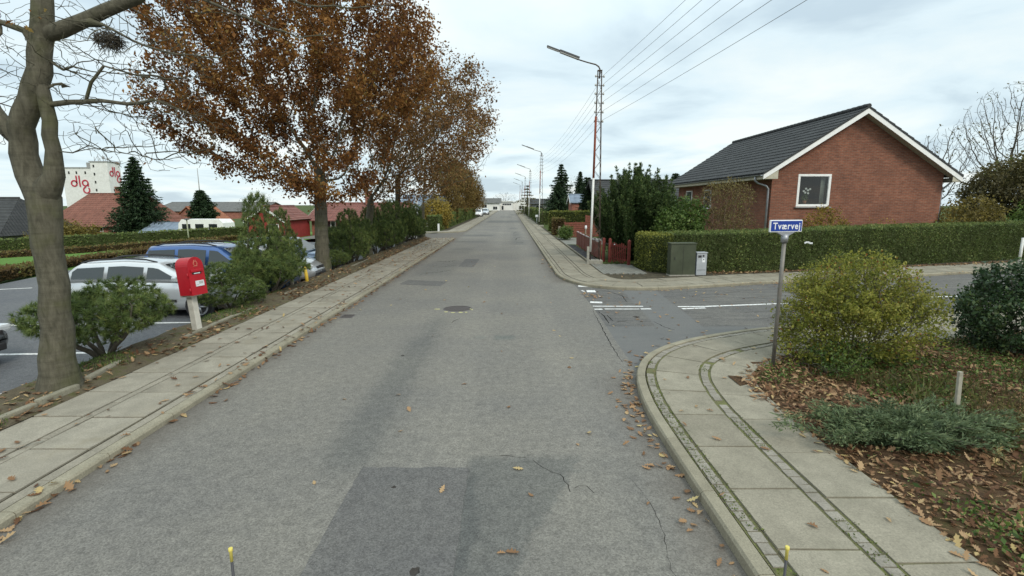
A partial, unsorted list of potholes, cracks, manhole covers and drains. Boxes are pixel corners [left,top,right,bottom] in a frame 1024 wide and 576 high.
crack [500,455,594,493]
